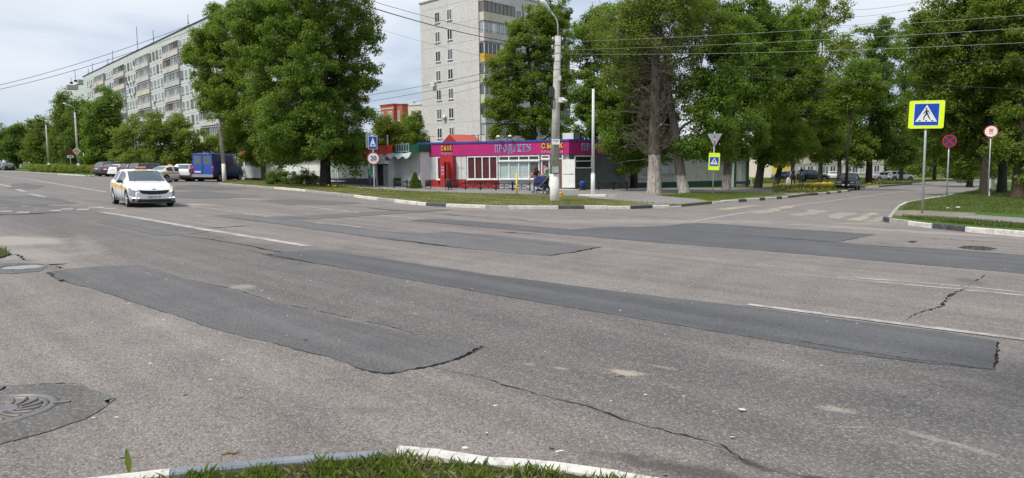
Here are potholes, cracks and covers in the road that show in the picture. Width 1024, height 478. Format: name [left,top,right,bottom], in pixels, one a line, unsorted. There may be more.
crack [902,274,986,322]
manhole cover [0,392,71,424]
crack [355,348,751,464]
